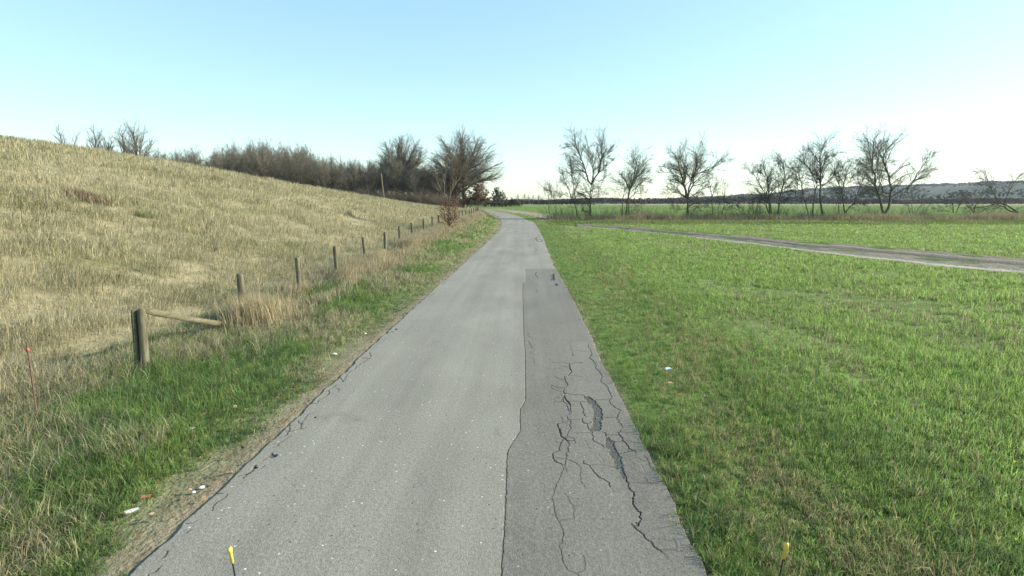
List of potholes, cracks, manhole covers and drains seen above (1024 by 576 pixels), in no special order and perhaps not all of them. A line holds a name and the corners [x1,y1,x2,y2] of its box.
crack [549,344,679,576]
pothole [604,438,626,479]
pothole [584,396,603,432]
